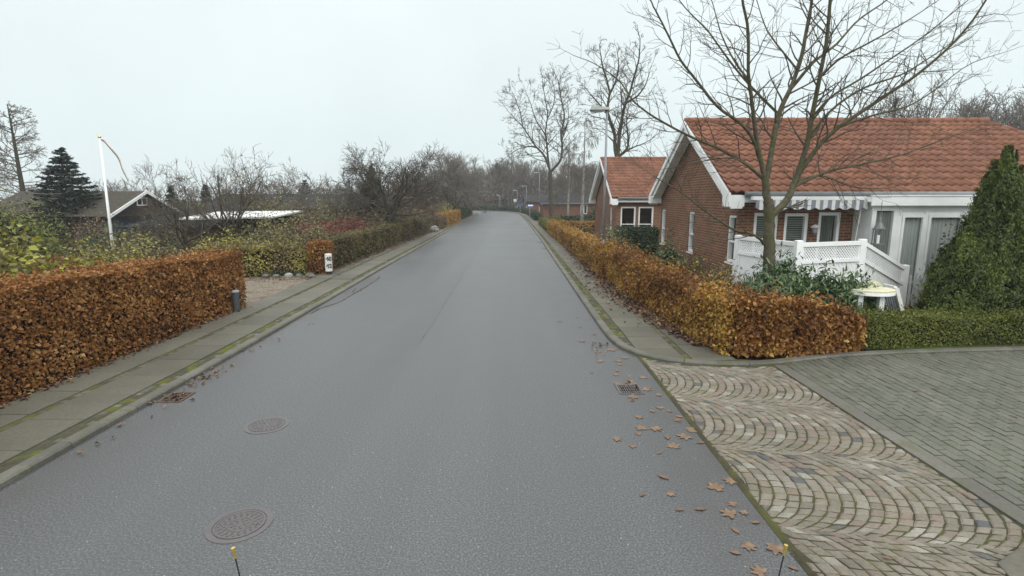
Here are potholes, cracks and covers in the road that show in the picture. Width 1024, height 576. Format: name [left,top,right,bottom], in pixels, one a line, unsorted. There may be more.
manhole cover [204,506,274,544]
drain grate [615,384,645,394]
drain grate [156,392,196,403]
crack [312,277,380,313]
manhole cover [243,416,290,434]
